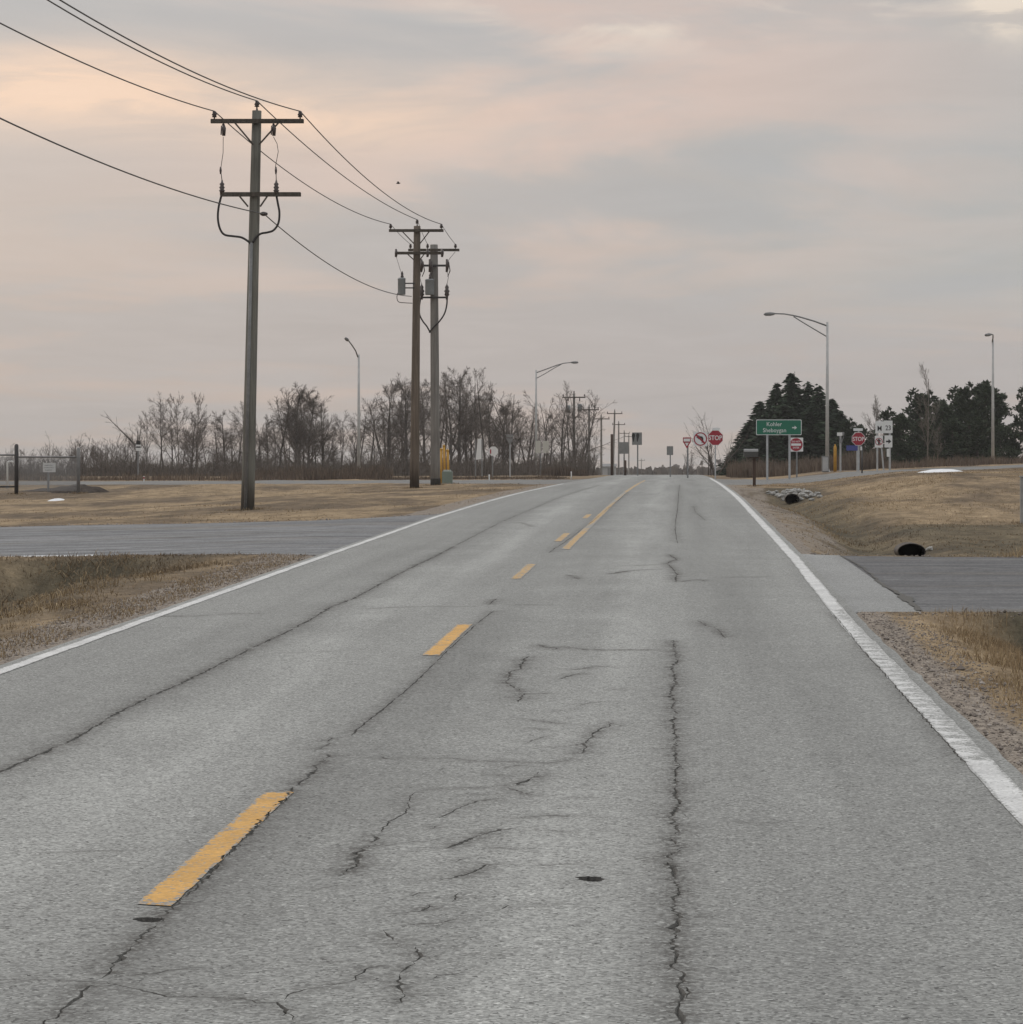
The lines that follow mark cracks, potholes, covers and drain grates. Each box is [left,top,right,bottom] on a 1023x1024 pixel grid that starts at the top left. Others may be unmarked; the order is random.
crack [663,640,692,1024]
crack [0,598,629,1024]
crack [0,485,599,772]
